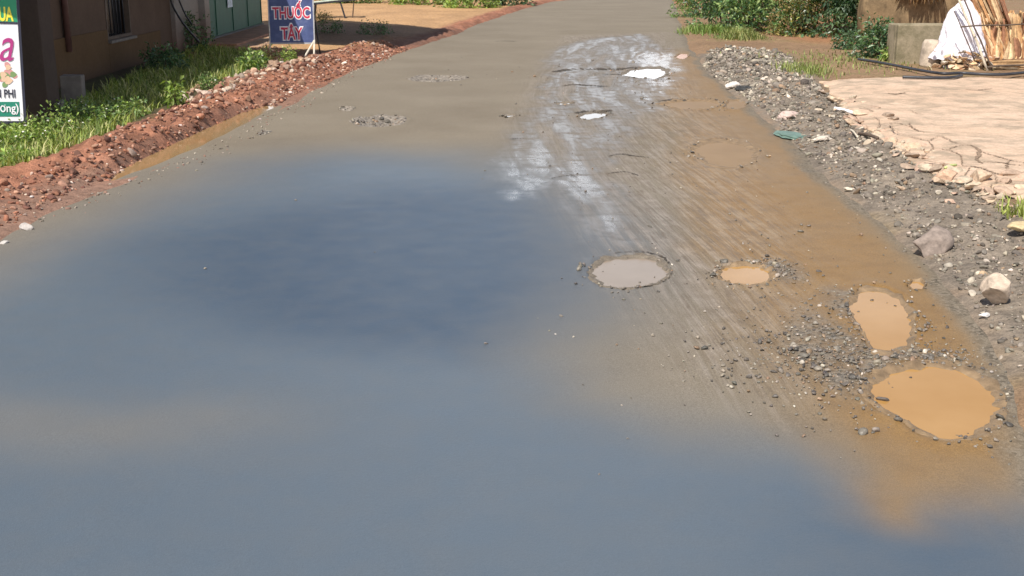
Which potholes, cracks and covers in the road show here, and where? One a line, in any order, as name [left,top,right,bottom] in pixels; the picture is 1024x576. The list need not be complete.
pothole [644,97,724,110]
pothole [408,74,469,82]
pothole [697,258,780,289]
pothole [561,249,680,293]
pothole [840,280,940,362]
pothole [903,277,927,291]
crack [554,67,664,86]
pothole [349,114,407,127]
pothole [683,138,771,170]
